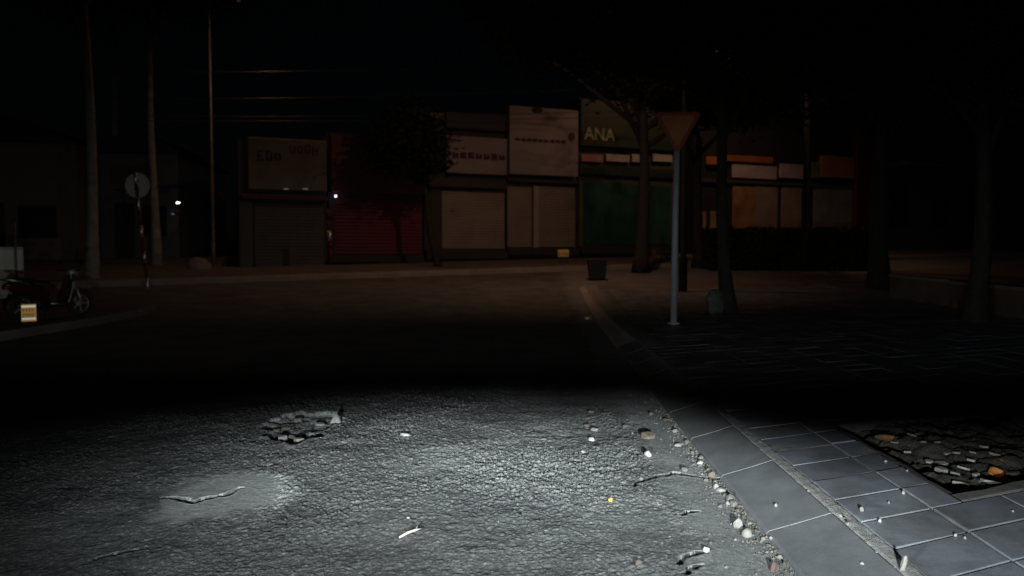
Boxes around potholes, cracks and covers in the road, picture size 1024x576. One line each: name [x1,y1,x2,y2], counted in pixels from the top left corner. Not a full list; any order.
crack [159,488,242,505]
crack [630,470,722,487]
crack [96,548,137,560]
pothole [252,409,352,450]
